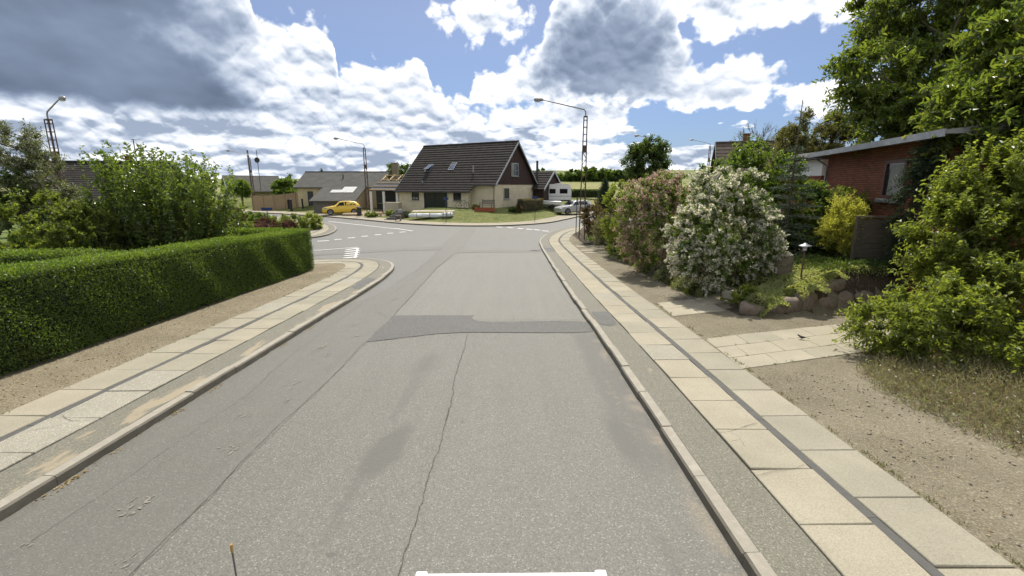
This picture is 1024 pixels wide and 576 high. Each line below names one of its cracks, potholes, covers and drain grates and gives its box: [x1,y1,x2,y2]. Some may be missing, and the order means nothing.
crack [398,334,468,576]
